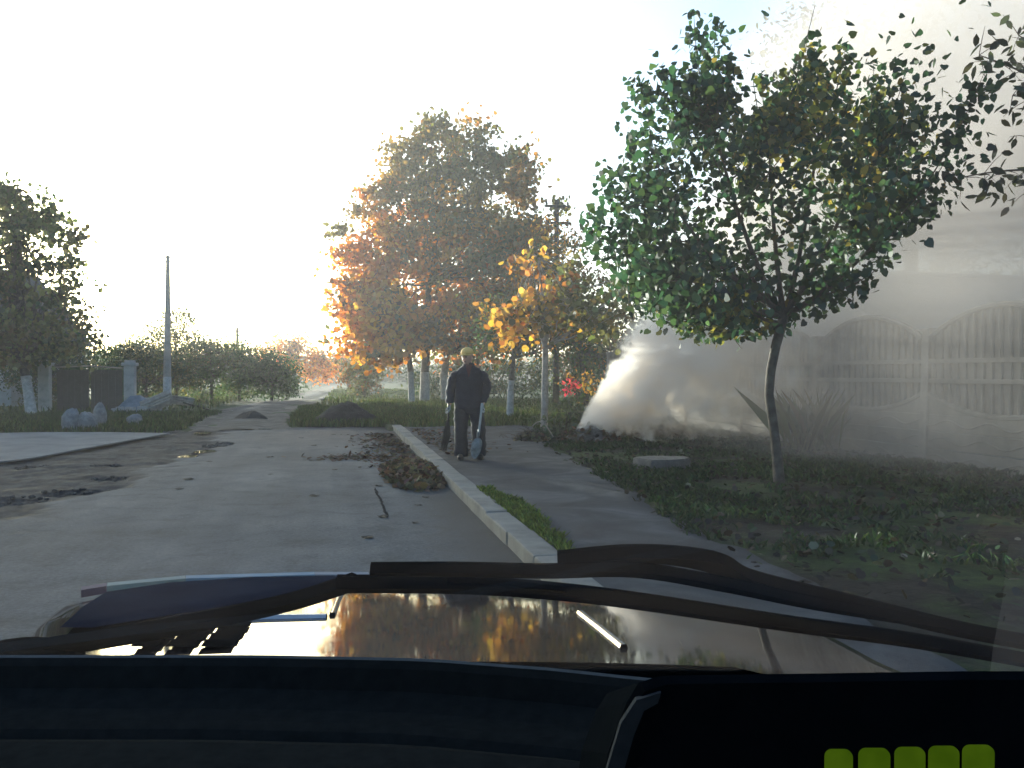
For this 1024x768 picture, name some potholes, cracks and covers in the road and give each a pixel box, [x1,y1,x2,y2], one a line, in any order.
pothole [0,495,52,507]
pothole [40,487,116,498]
crack [374,488,389,518]
